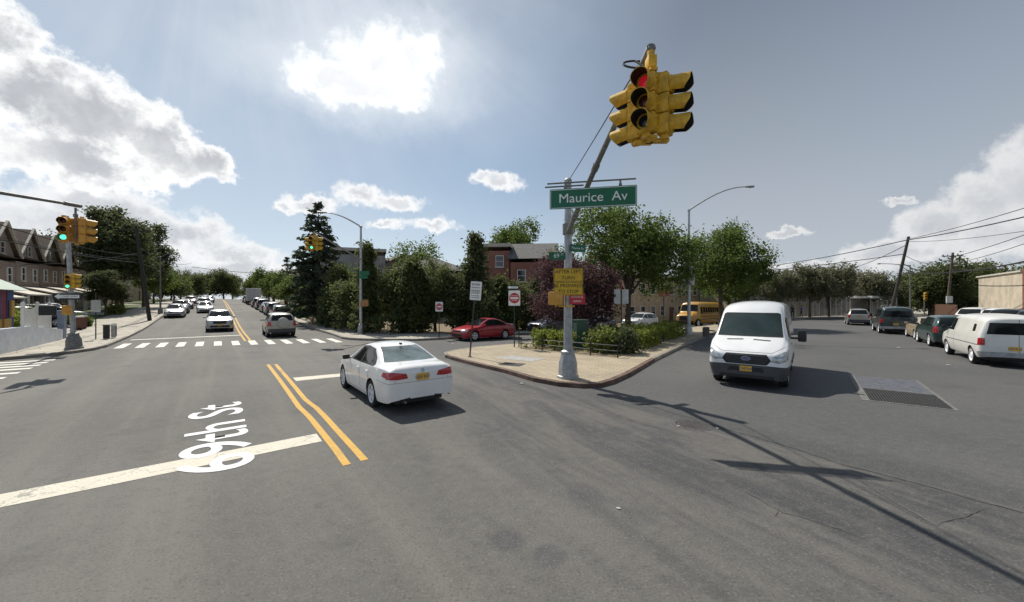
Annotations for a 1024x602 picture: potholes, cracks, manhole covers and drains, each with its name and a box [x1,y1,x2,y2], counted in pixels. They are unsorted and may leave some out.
crack [845,472,983,525]
drain grate [848,375,960,411]
manhole cover [671,419,714,431]
